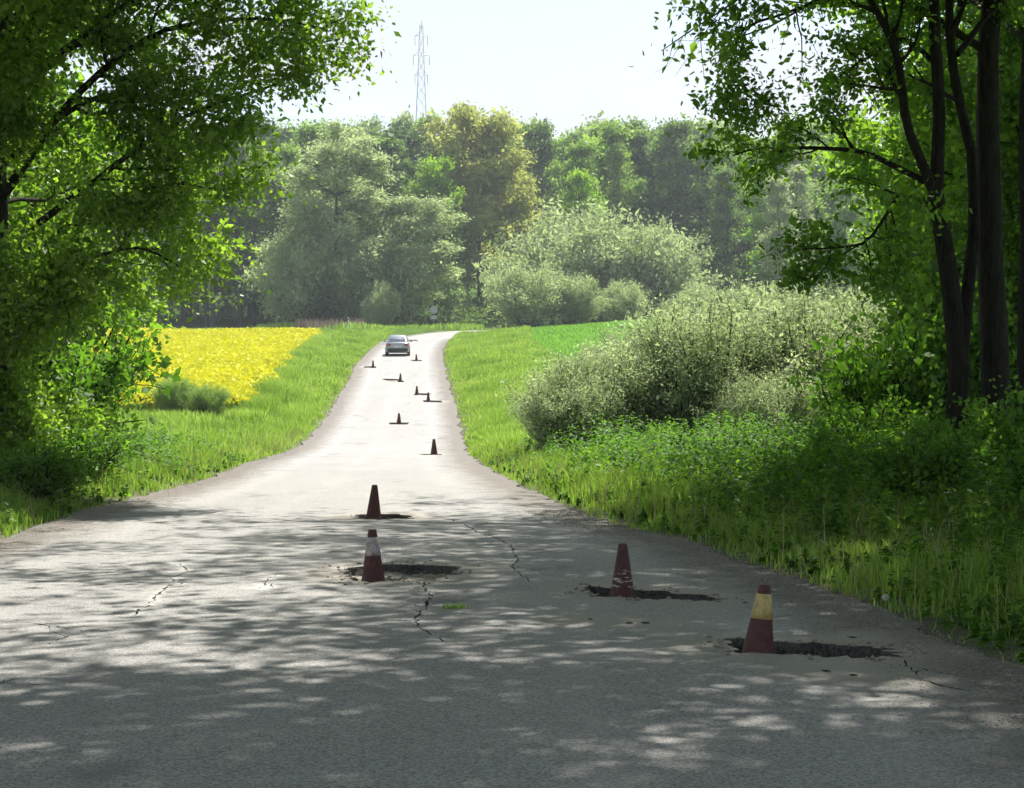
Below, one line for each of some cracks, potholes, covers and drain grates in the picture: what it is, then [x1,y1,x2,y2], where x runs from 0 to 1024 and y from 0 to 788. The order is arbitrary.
pothole [561,580,748,603]
crack [388,581,444,641]
crack [904,659,980,692]
crack [18,622,83,645]
pothole [687,633,965,664]
pothole [323,559,480,585]
crack [135,562,194,615]
crack [453,505,529,582]
